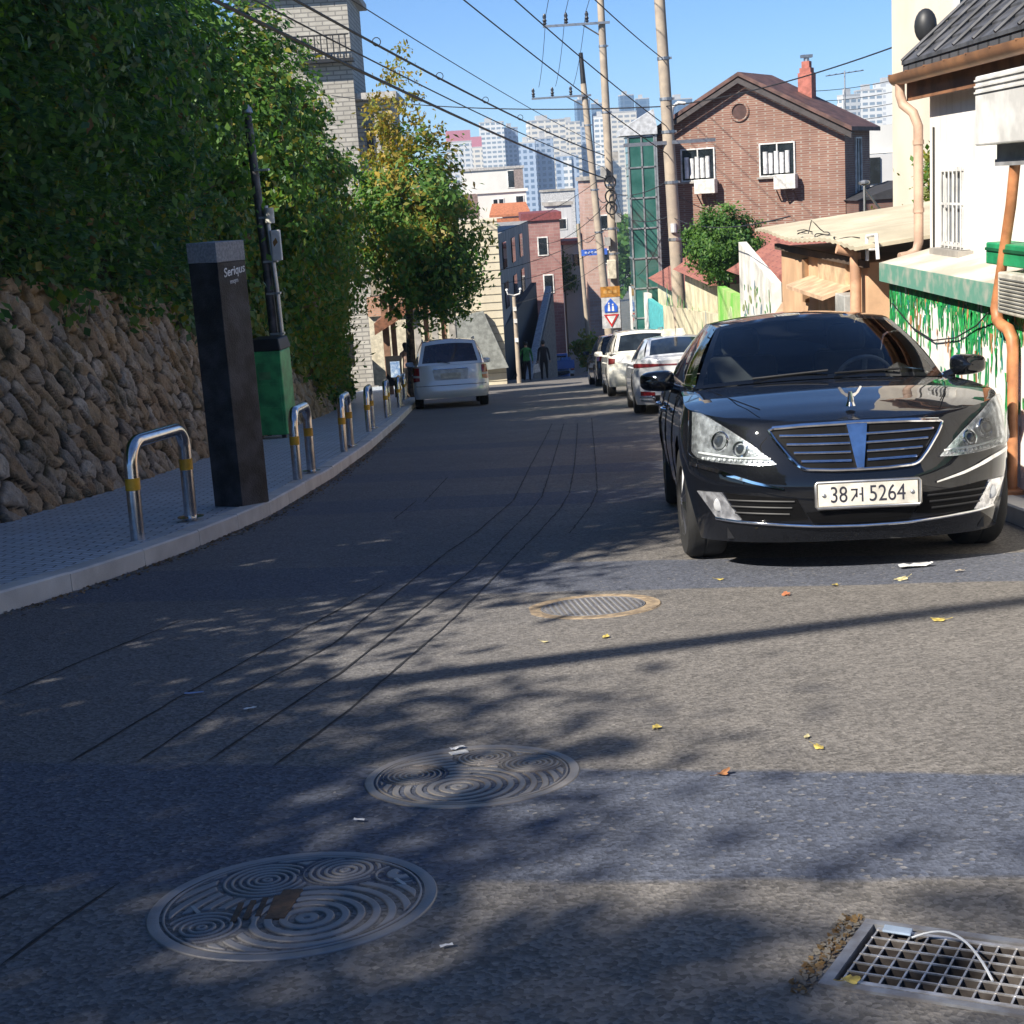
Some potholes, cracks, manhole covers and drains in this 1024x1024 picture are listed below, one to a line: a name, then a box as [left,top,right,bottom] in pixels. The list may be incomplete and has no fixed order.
drain grate [818,918,1024,1018]
manhole cover [145,852,438,962]
manhole cover [364,745,580,809]
